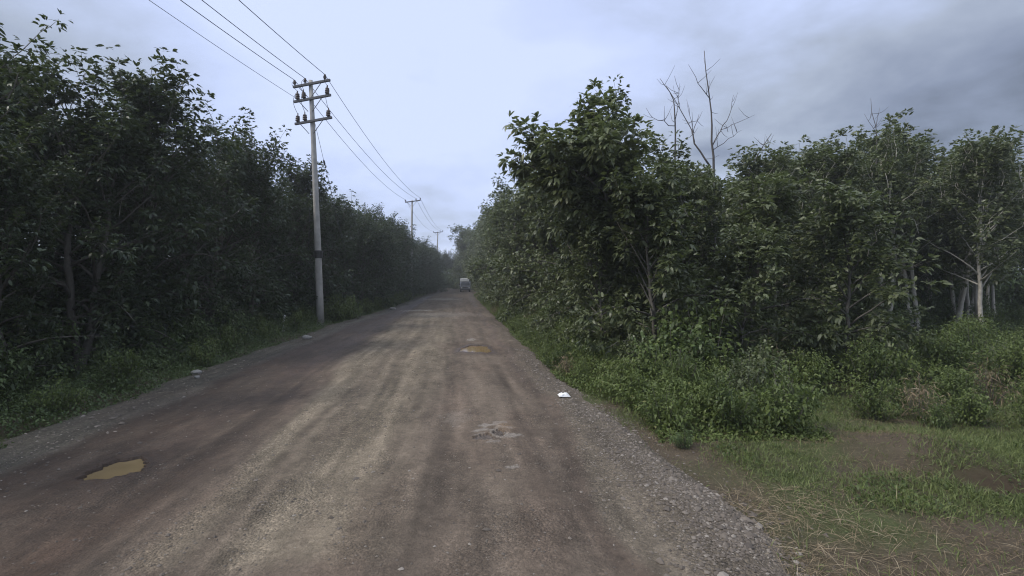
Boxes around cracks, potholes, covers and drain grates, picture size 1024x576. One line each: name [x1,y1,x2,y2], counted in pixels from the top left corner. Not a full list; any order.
pothole [454,344,497,354]
pothole [489,428,507,438]
pothole [61,454,158,485]
pothole [469,432,496,442]
